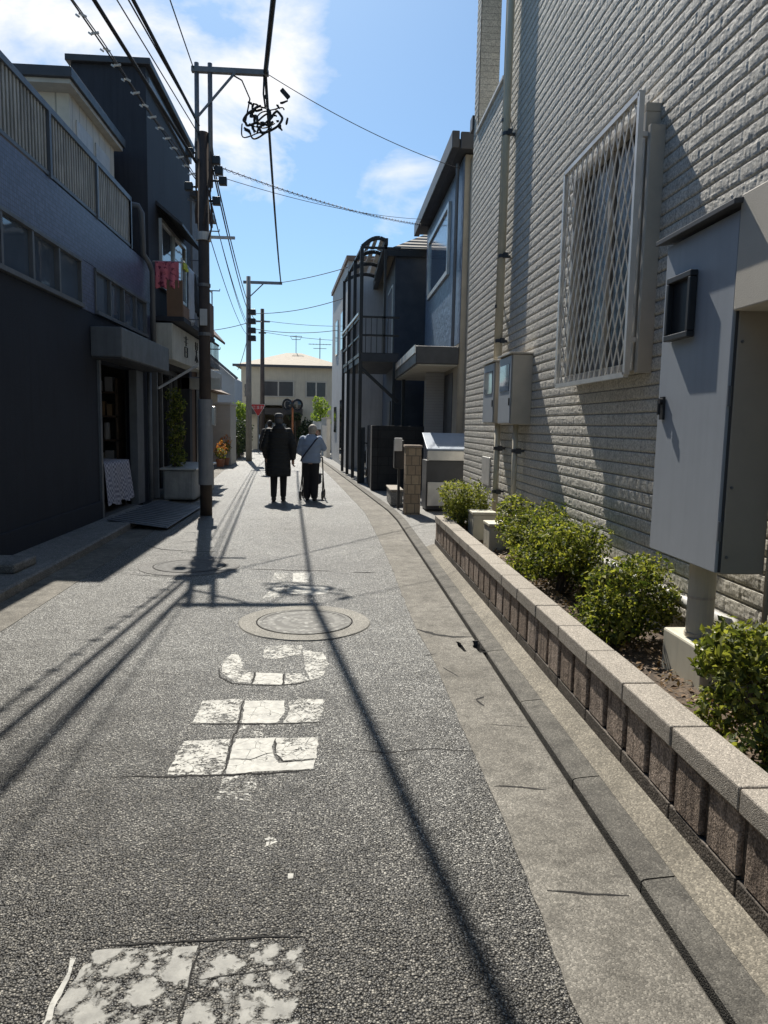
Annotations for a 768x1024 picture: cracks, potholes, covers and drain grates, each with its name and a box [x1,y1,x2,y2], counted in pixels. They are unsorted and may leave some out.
manhole cover [238,605,370,641]
crack [417,629,473,677]
manhole cover [138,557,240,576]
